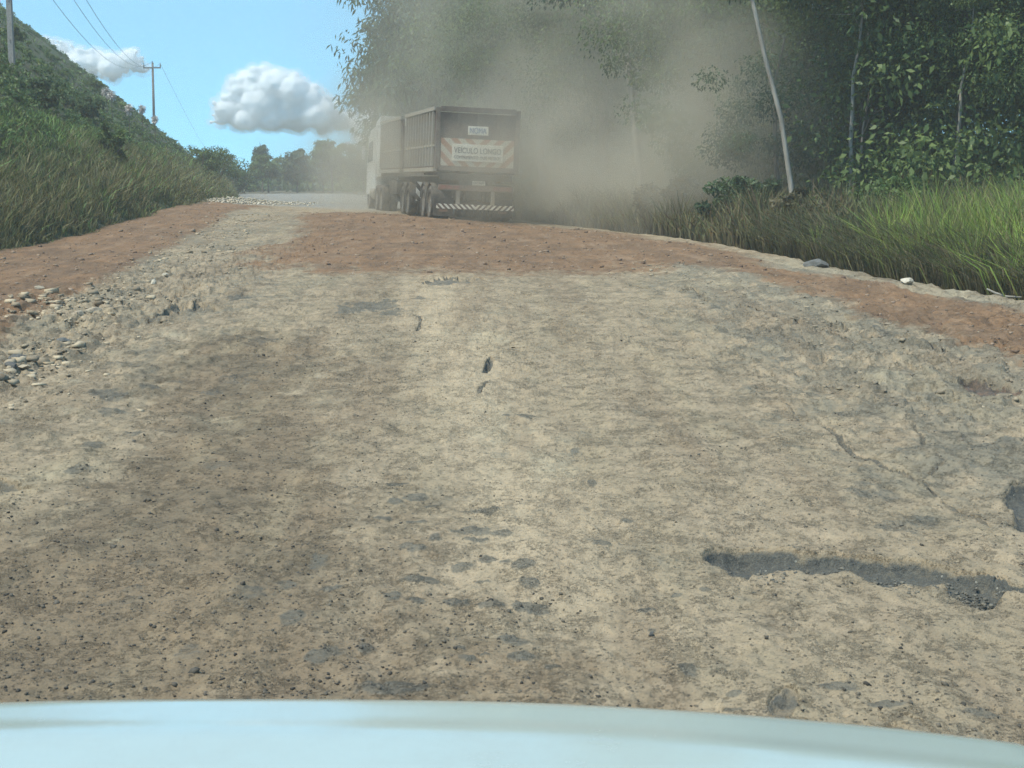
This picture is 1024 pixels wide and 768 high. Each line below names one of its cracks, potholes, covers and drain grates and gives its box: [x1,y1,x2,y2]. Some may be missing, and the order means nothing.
crack [785,403,989,527]
pothole [1003,483,1024,532]
pothole [702,550,1024,611]
pothole [422,276,483,286]
